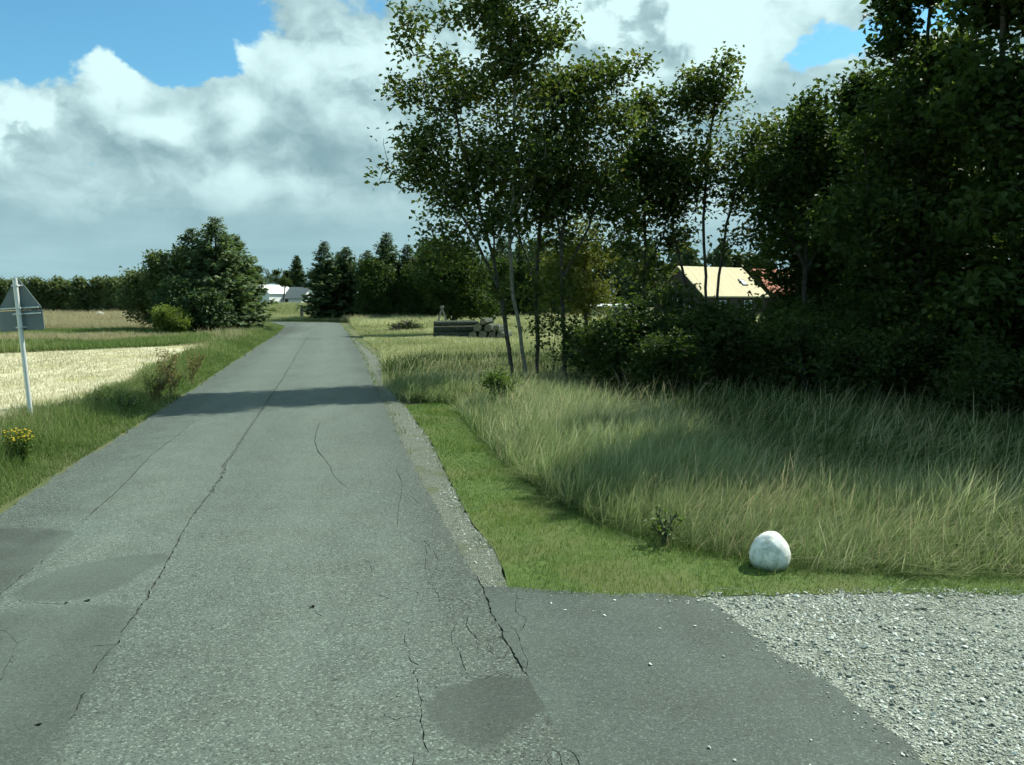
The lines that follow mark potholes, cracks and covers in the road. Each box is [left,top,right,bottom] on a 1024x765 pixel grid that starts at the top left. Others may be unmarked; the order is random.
crack [383,622,429,764]
crack [449,576,528,679]
